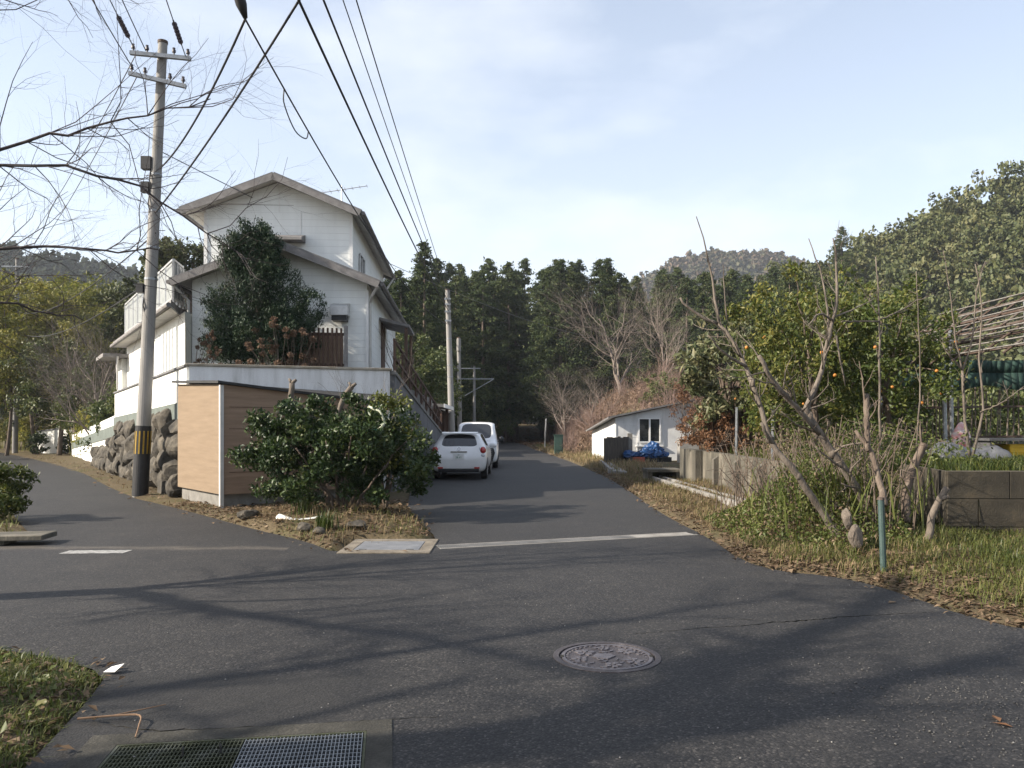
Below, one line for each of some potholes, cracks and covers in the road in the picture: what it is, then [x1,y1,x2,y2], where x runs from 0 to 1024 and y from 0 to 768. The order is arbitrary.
drain grate [62,719,393,768]
crack [635,612,926,634]
manhole cover [553,641,661,673]
